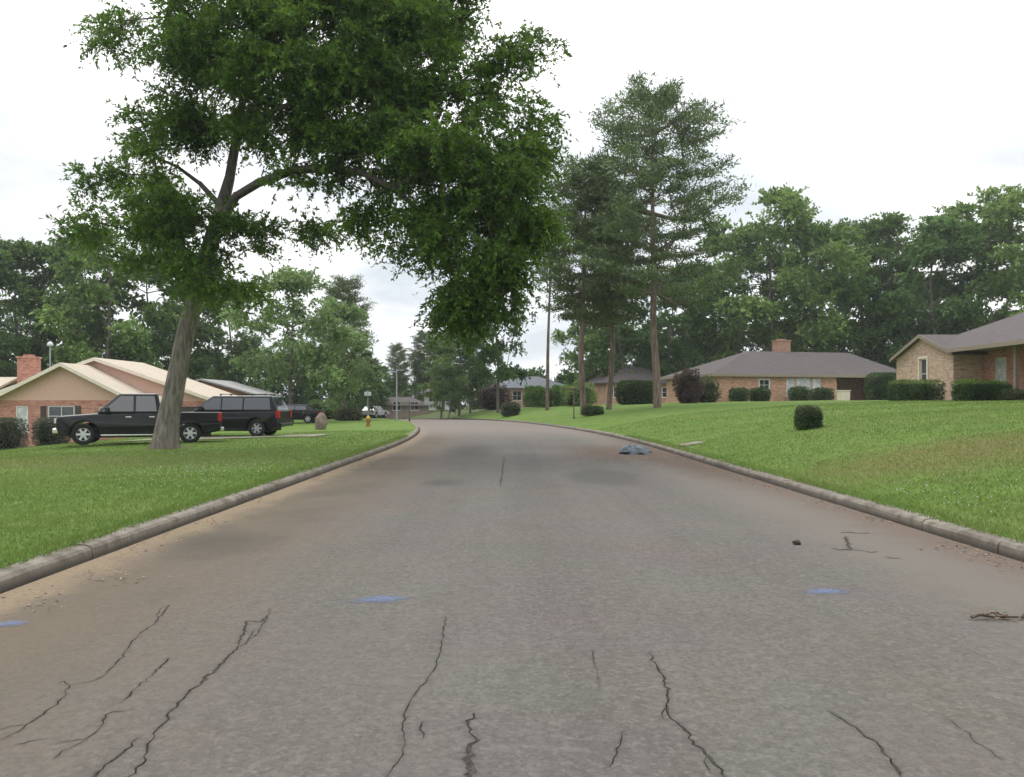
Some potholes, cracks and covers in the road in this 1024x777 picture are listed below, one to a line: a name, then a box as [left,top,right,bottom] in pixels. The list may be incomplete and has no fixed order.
crack [834,532,900,559]
crack [3,606,270,777]
crack [609,732,623,767]
crack [387,617,446,777]
crack [827,710,902,777]
crack [649,653,725,777]
crack [461,714,480,777]
